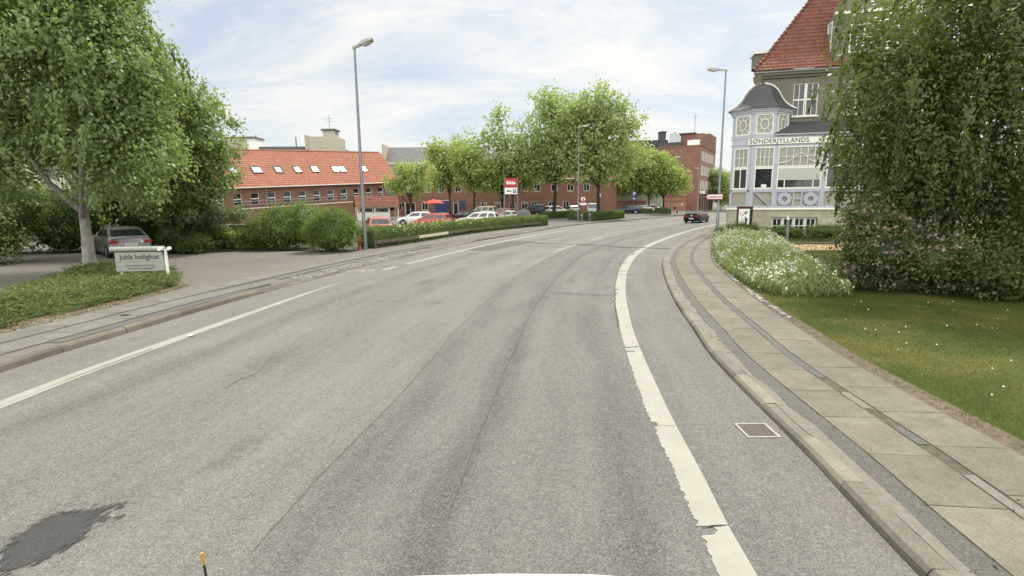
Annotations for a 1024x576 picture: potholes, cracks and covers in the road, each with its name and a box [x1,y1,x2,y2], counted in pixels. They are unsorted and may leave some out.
drain grate [733,423,781,438]
crack [252,224,686,552]
